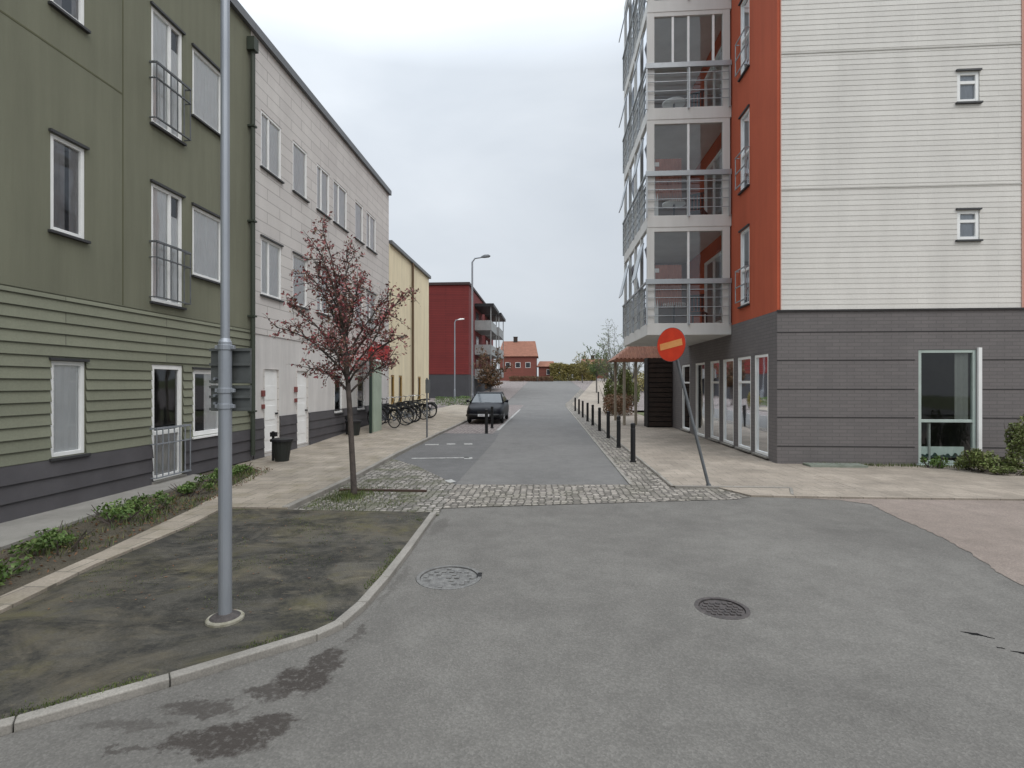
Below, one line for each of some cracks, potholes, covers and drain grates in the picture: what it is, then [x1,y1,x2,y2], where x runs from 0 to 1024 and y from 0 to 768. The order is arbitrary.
manhole cover [416,565,482,590]
crack [961,631,1024,654]
manhole cover [694,597,751,620]
